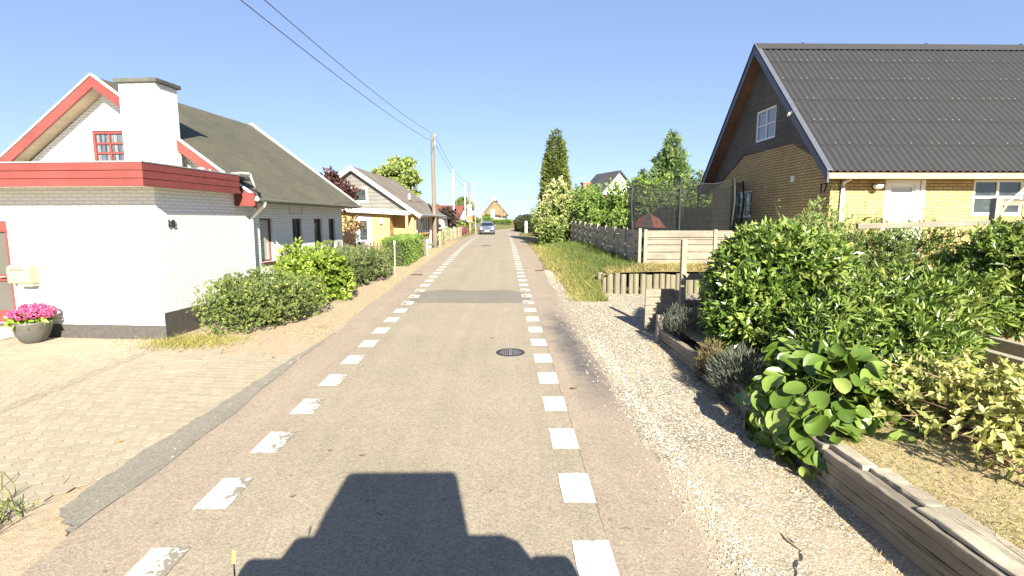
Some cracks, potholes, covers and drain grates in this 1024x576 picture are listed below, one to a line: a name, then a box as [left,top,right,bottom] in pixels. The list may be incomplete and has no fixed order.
manhole cover [496,348,525,357]
crack [781,534,803,576]
